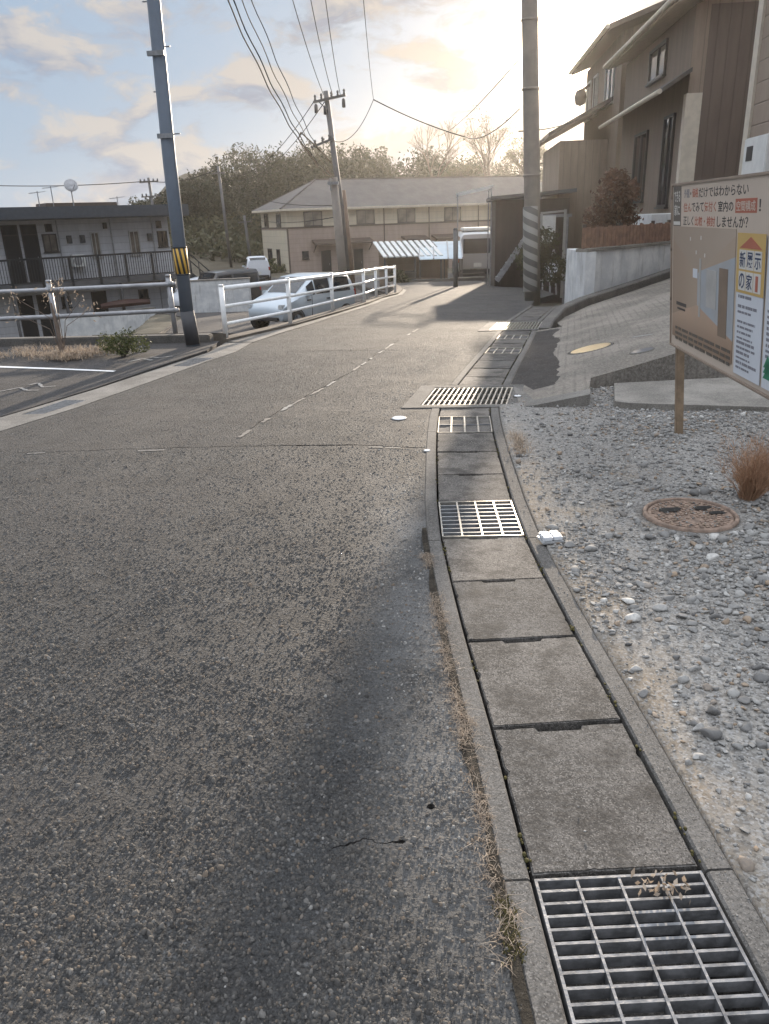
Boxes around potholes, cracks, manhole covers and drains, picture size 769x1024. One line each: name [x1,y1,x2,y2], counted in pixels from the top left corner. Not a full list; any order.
manhole cover [642,497,740,533]
crack [331,838,405,850]
drain grate [402,384,524,411]
drain grate [438,416,493,434]
drain grate [533,871,769,1024]
drain grate [438,500,524,544]
manhole cover [569,342,613,355]
